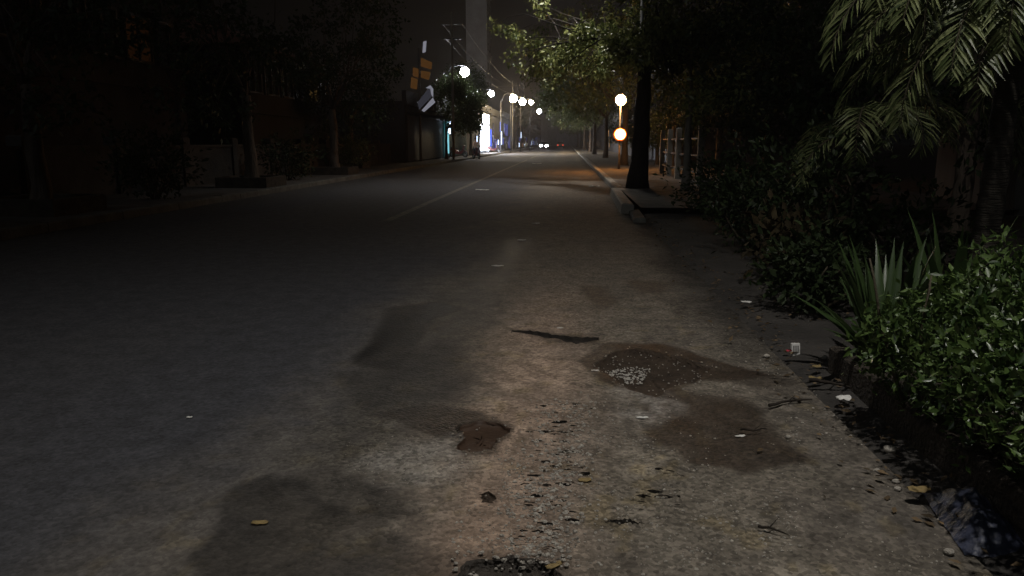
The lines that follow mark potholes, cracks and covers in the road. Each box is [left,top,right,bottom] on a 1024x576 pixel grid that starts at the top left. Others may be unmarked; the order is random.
crack [512,330,599,346]
pothole [591,346,717,399]
pothole [450,549,570,576]
pothole [452,418,515,456]
pothole [474,489,502,508]
